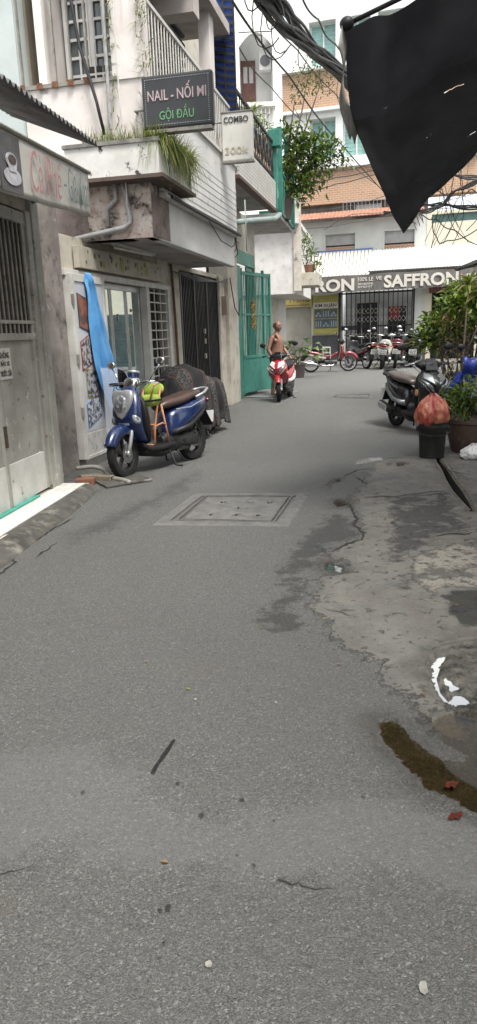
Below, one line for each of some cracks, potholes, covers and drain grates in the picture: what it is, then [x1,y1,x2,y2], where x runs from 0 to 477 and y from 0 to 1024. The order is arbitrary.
manhole cover [153,493,309,526]
crack [331,468,446,552]
crack [0,519,71,574]
crack [276,879,336,890]
